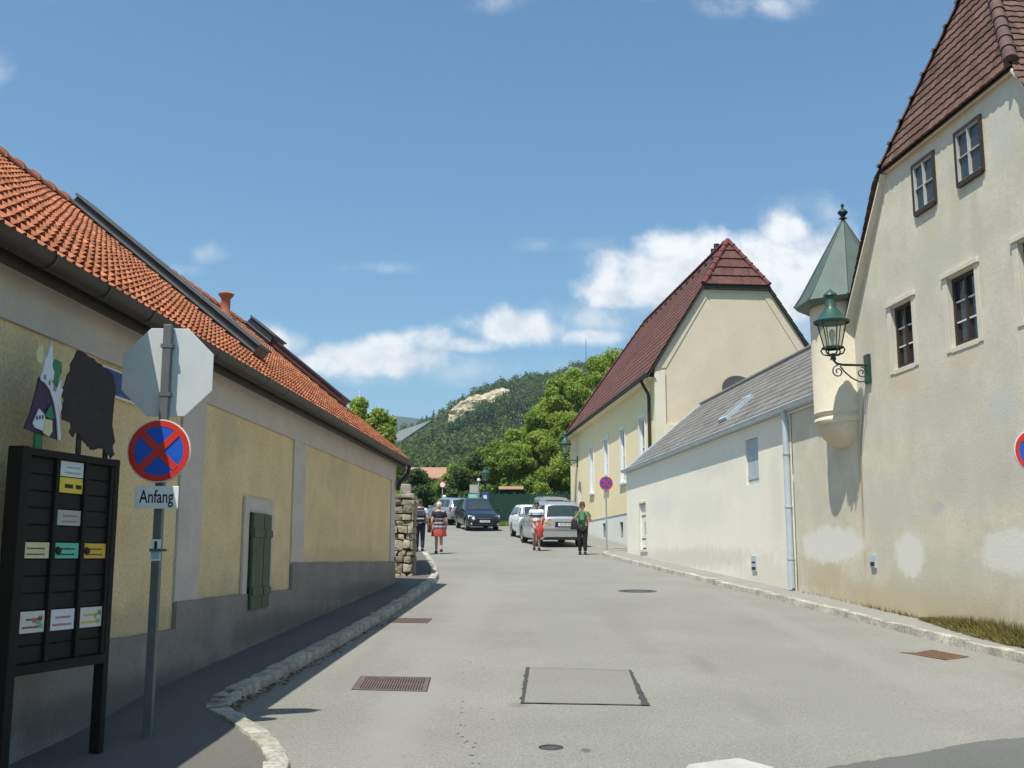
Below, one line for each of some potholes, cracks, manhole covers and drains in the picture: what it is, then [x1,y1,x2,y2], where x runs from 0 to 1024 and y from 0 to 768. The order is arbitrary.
drain grate [353,676,430,692]
drain grate [901,650,967,660]
